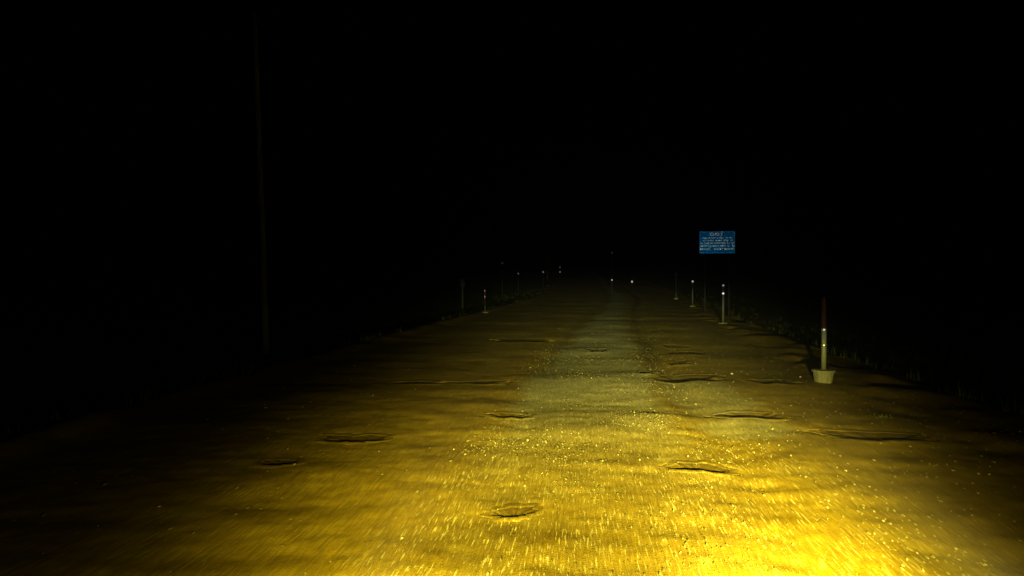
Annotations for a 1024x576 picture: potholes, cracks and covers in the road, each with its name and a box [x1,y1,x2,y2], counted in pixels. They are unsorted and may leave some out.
pothole [252,457,307,469]
pothole [738,378,809,386]
pothole [805,428,943,444]
pothole [307,433,396,445]
pothole [479,503,548,522]
